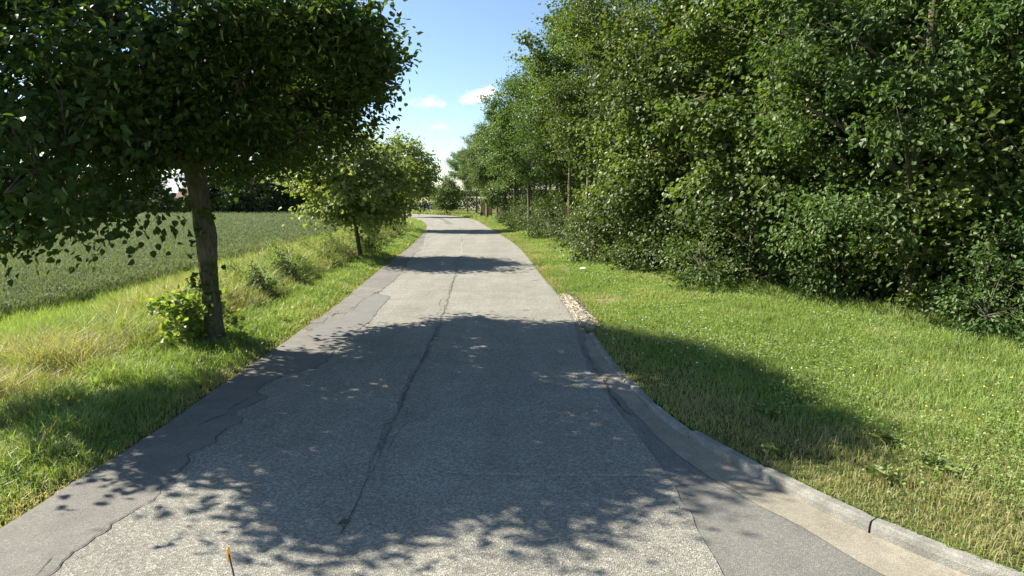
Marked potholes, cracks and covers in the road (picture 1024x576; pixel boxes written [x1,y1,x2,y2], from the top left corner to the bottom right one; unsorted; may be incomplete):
crack [336,321,441,540]
